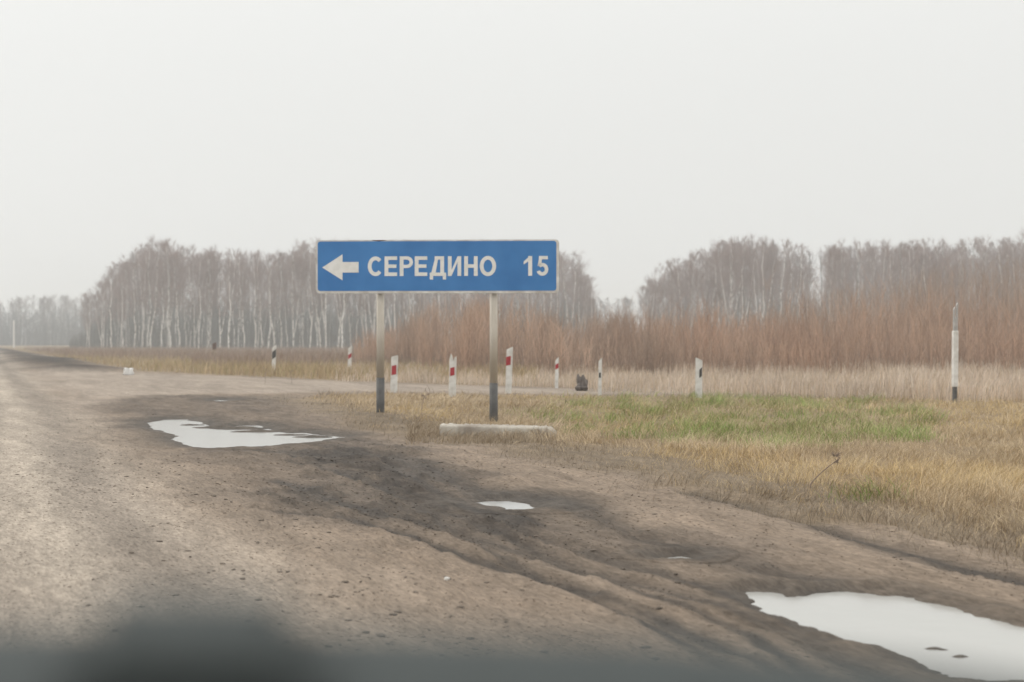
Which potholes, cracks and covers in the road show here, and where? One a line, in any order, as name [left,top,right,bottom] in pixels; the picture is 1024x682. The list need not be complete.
pothole [111,415,389,450]
pothole [684,573,1024,681]
